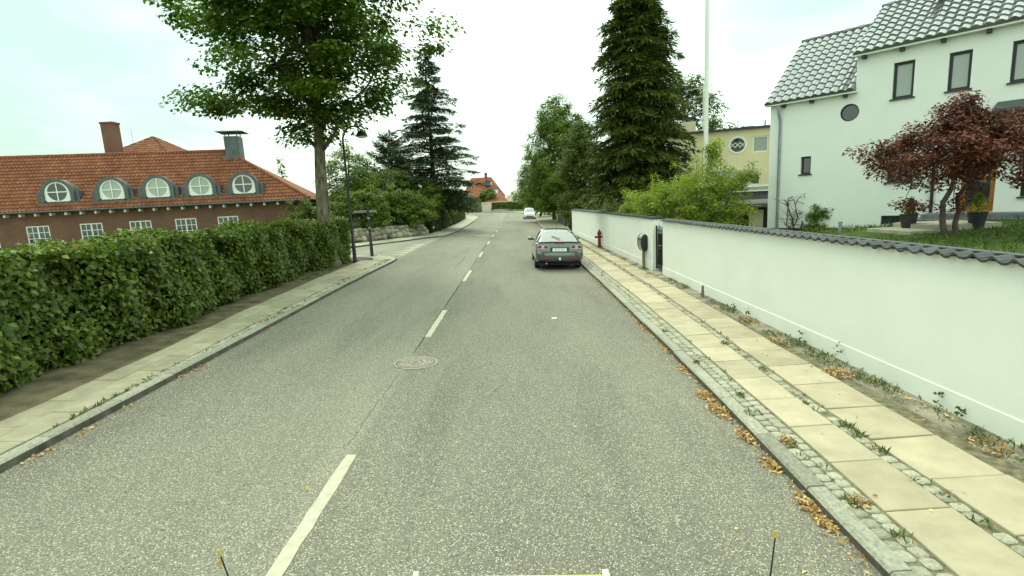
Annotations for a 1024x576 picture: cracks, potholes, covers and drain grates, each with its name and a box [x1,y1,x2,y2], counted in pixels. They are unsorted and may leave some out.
manhole cover [393,356,438,370]
